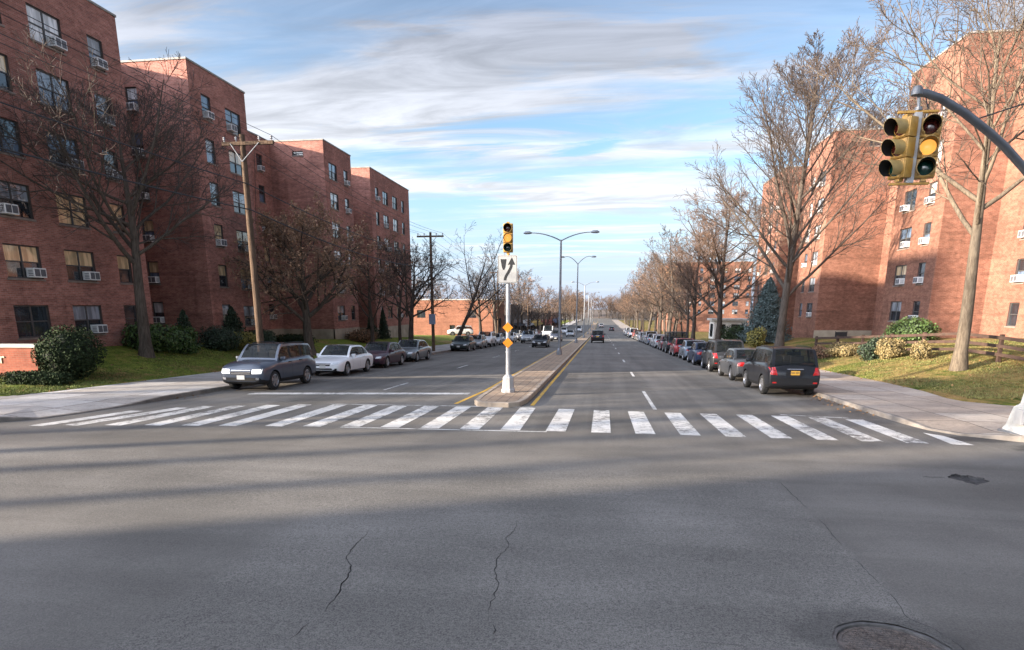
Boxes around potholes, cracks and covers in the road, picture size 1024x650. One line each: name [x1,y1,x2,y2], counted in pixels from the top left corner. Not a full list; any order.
manhole cover [832,621,952,650]
pothole [947,474,989,485]
crack [488,520,517,634]
crack [326,532,368,609]
